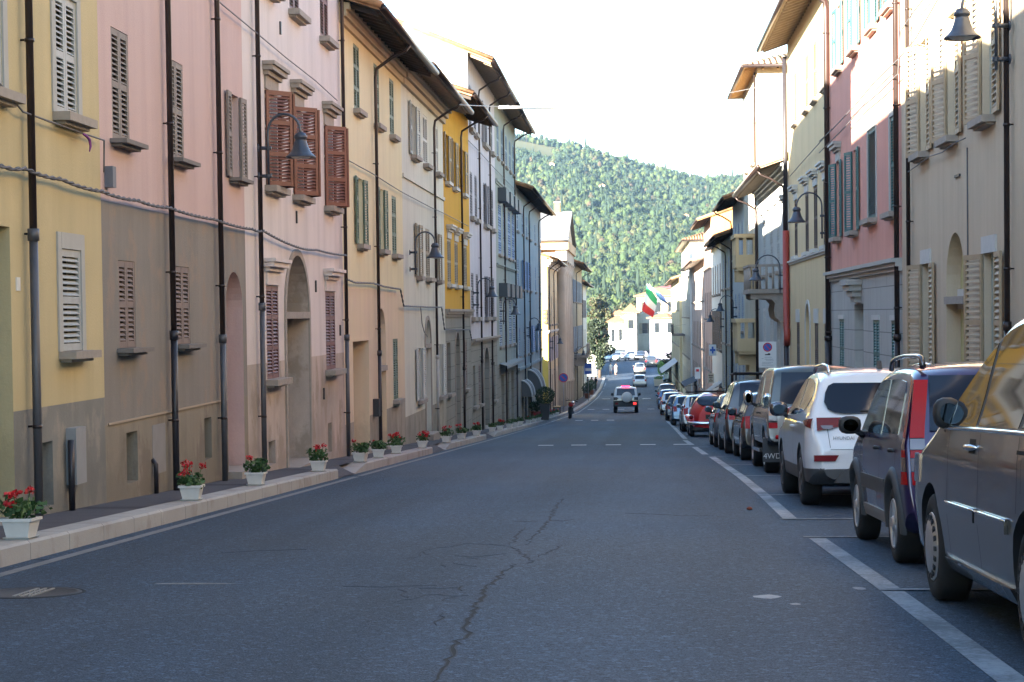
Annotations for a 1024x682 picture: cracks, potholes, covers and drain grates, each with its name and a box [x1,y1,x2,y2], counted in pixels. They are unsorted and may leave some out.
manhole cover [0,587,86,599]
crack [343,499,573,682]
